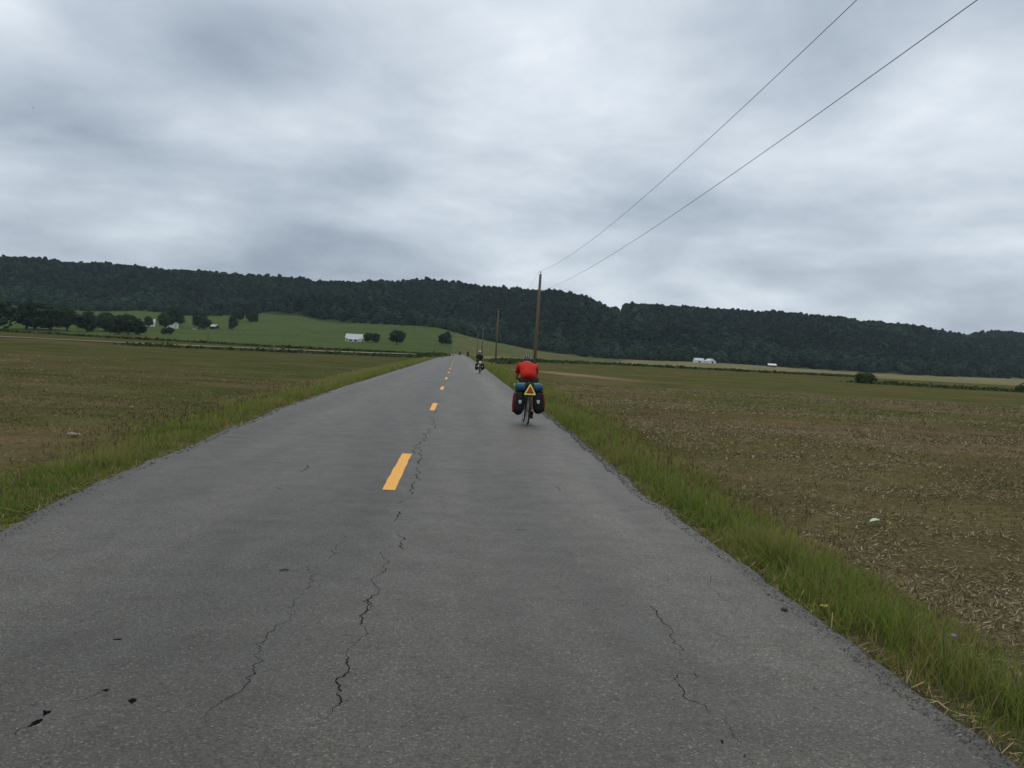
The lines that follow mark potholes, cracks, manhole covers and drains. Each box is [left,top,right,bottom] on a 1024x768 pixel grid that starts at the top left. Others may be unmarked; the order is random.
crack [204,536,346,727]
crack [325,411,437,719]
crack [650,606,753,764]
